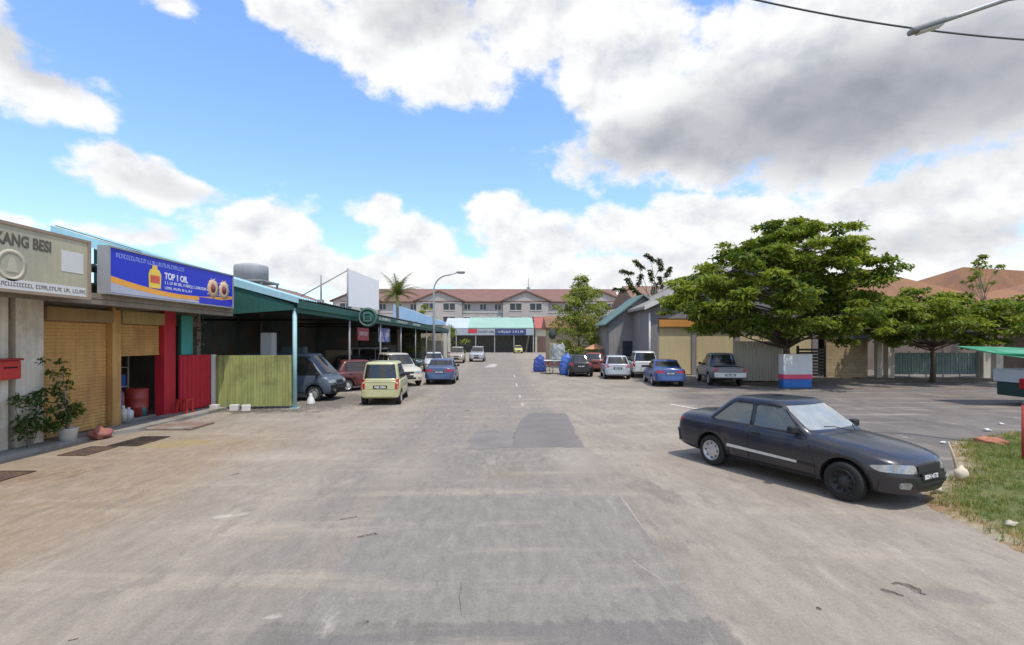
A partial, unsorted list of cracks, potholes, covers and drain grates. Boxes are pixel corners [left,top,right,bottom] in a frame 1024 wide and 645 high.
drain grate [107,436,170,446]
crack [617,492,654,541]
